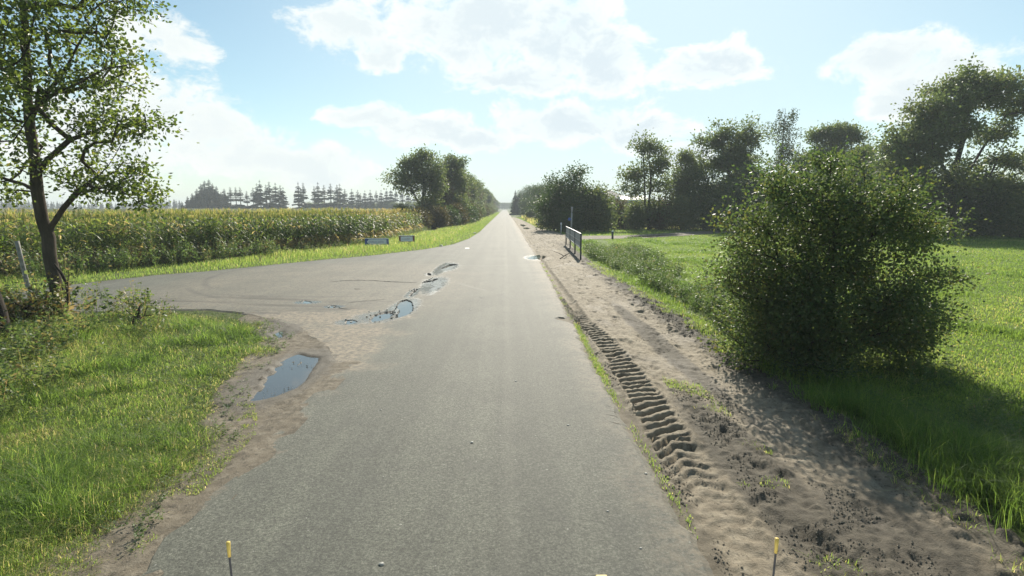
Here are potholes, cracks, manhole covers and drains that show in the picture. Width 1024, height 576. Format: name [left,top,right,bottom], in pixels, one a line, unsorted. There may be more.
pothole [366,308,400,322]
pothole [394,299,417,318]
